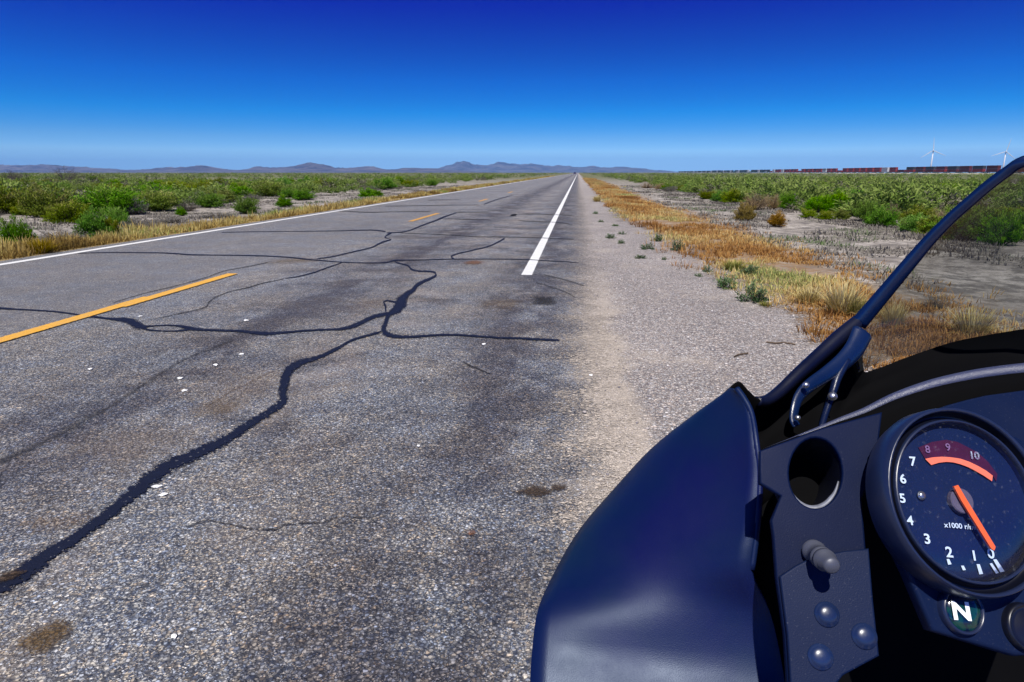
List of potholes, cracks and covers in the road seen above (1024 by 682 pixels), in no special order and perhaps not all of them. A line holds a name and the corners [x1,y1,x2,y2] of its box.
crack [113,262,284,320]
crack [186,515,372,531]
crack [344,199,573,240]
